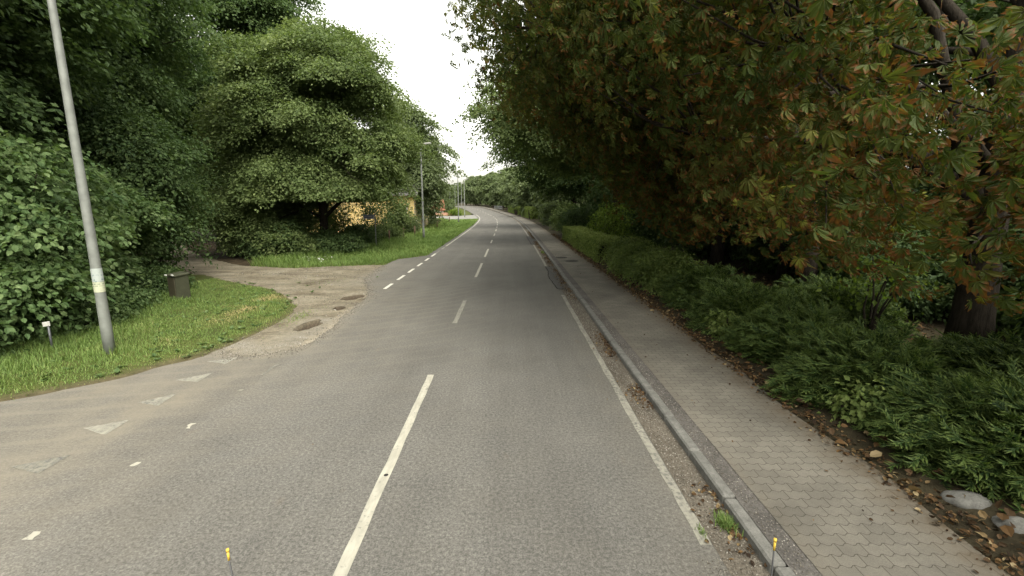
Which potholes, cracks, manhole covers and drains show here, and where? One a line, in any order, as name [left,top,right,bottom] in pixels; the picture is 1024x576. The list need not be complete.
pothole [292,319,323,331]
